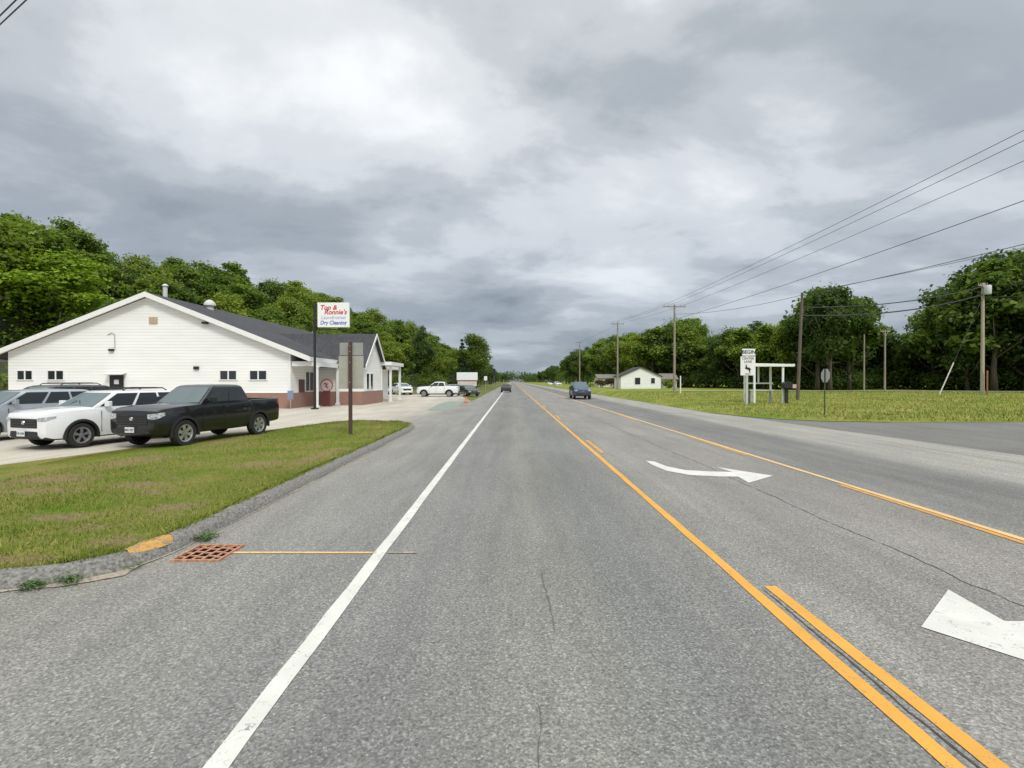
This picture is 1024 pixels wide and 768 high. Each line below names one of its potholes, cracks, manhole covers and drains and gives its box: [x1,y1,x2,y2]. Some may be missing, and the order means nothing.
drain grate [170,544,245,562]
crack [615,427,1023,606]
crack [541,570,555,633]
